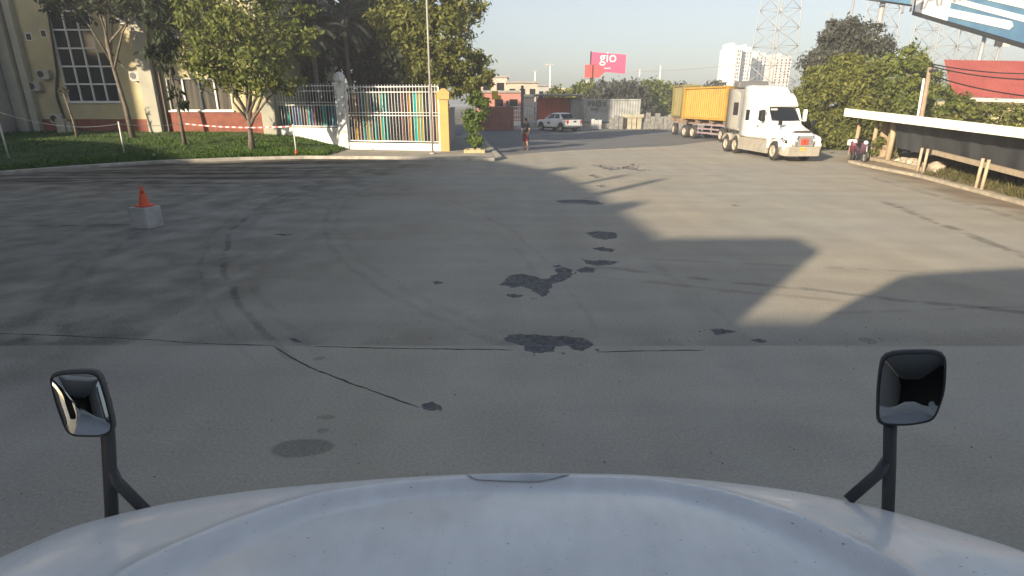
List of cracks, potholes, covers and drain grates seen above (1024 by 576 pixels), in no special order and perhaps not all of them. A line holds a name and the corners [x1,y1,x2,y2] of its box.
crack [274,346,505,408]
